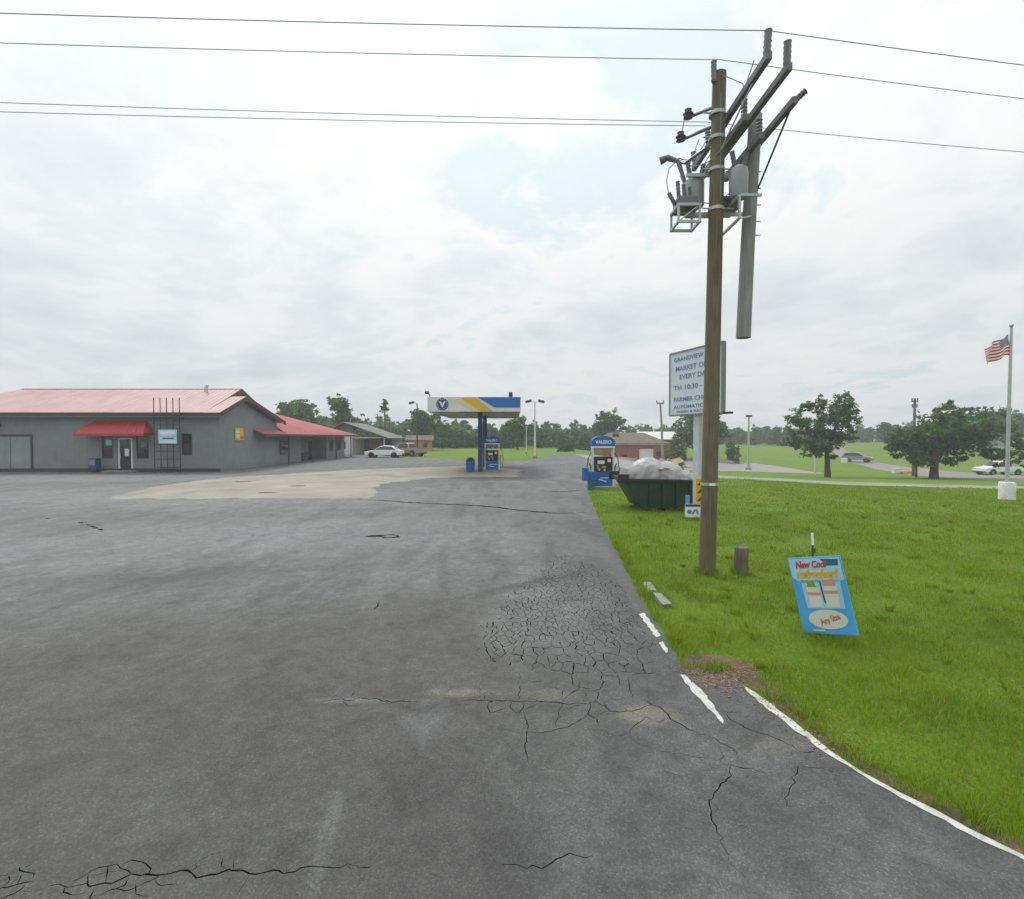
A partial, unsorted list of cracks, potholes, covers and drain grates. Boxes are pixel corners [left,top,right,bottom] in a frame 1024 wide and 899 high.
crack [0,865,35,899]
crack [456,555,836,883]
crack [51,852,371,899]
crack [327,693,417,707]
